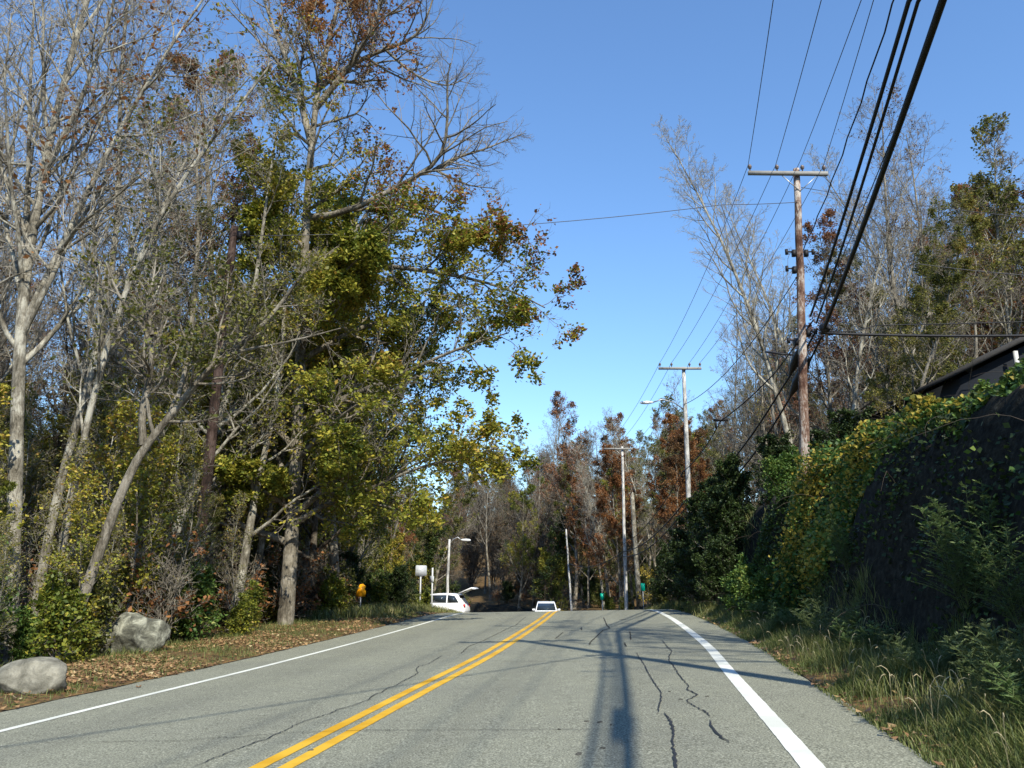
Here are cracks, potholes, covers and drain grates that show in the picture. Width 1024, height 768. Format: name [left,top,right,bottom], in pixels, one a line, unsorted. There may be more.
crack [581,617,730,743]
